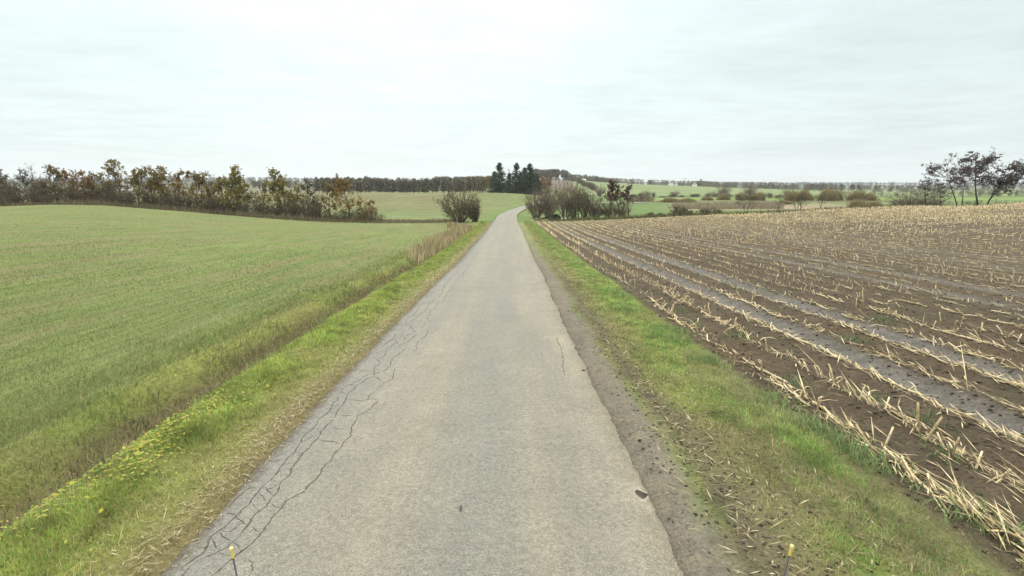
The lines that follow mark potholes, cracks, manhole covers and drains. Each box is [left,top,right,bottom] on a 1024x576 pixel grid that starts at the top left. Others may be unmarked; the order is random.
crack [179,256,475,576]
